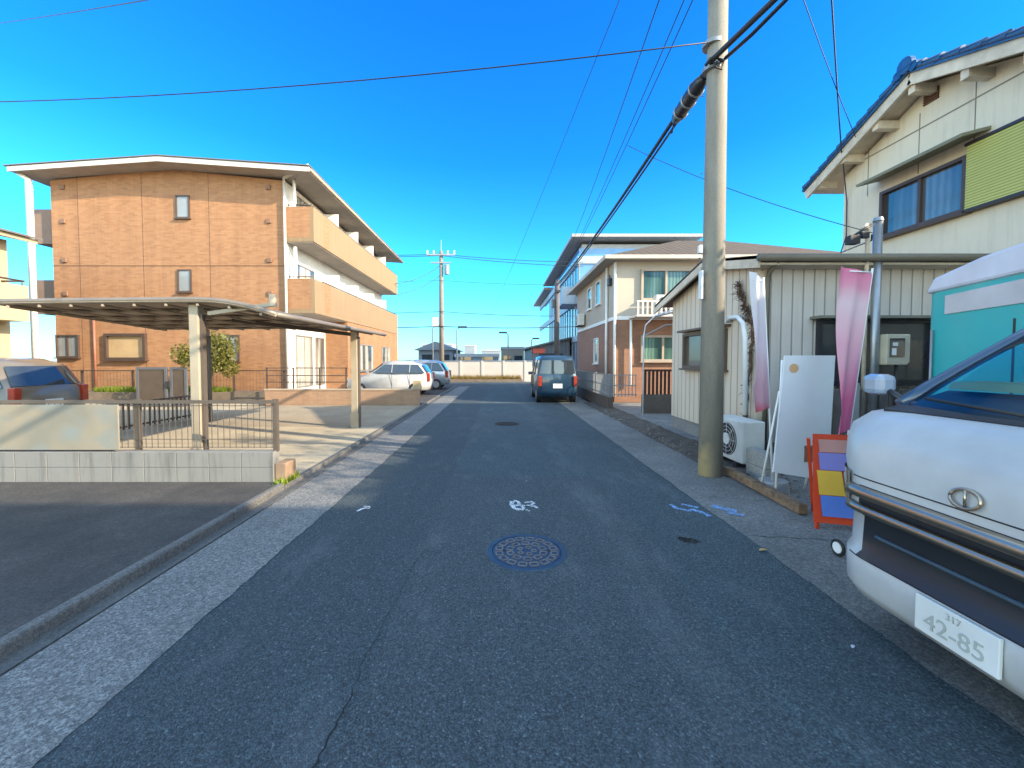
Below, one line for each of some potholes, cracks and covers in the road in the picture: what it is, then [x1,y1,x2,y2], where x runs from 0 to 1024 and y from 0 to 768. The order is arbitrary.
crack [312,550,438,768]
manhole cover [487,534,567,572]
